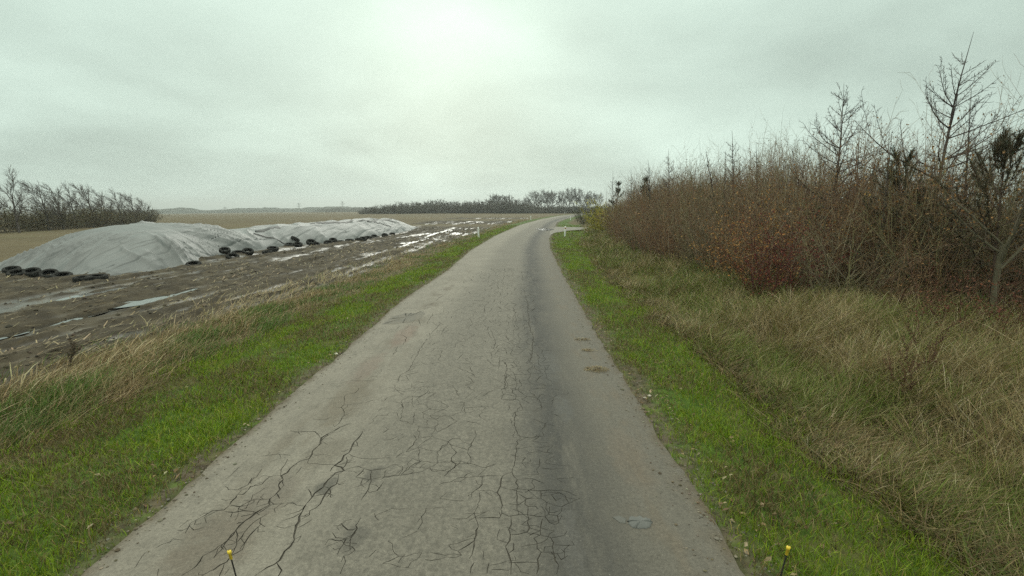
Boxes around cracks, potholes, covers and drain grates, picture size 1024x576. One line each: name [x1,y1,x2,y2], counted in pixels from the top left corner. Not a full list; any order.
crack [134,294,580,576]
